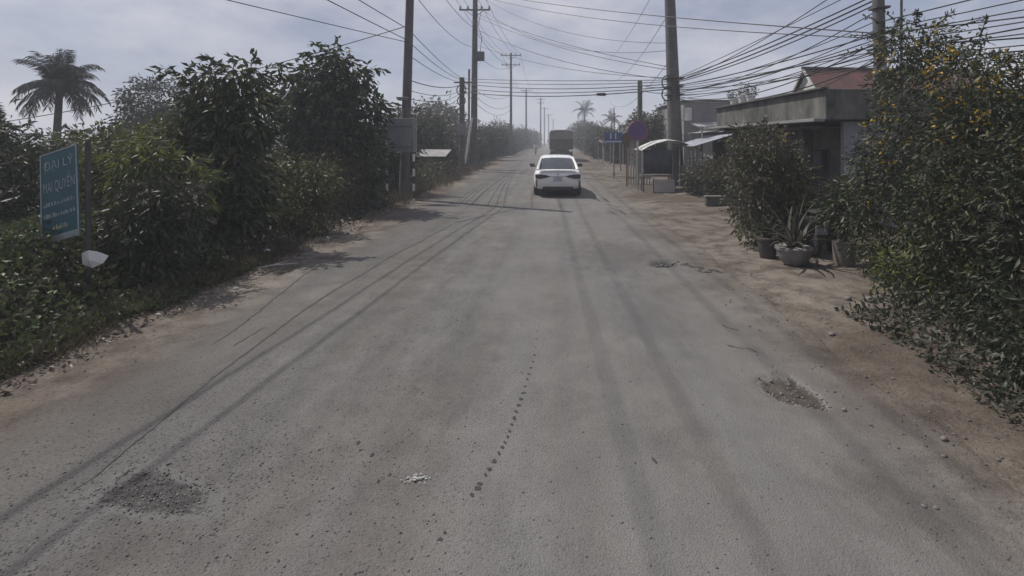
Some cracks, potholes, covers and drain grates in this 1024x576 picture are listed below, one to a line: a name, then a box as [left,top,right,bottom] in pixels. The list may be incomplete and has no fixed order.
pothole [756,374,832,411]
pothole [78,460,228,524]
crack [680,263,722,273]
